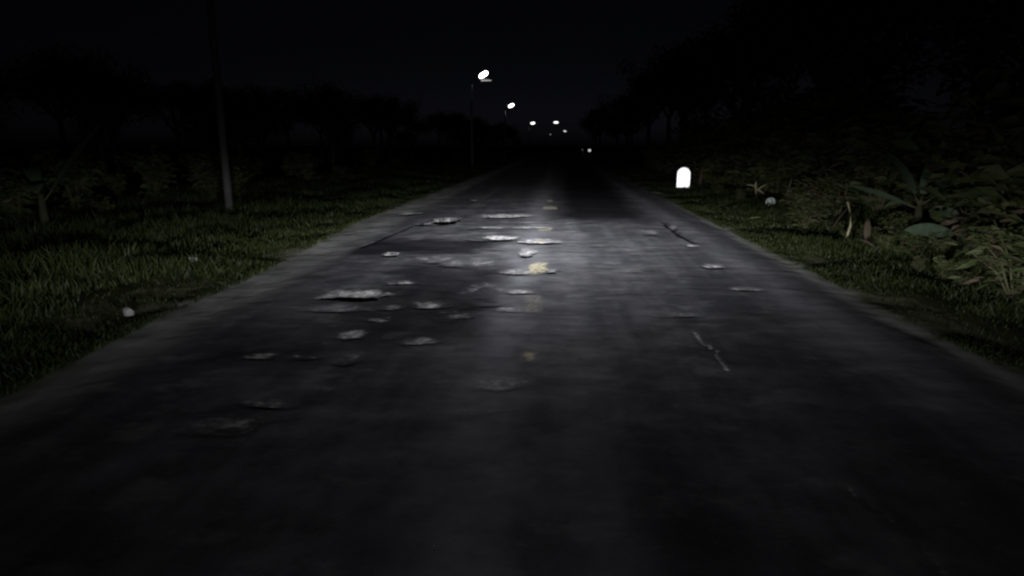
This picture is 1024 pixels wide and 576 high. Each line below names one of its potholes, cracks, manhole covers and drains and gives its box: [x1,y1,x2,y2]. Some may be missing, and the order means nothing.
pothole [411,301,452,310]
pothole [171,413,282,438]
pothole [334,329,370,341]
pothole [240,397,309,410]
pothole [397,337,440,346]
pothole [500,268,536,276]
pothole [464,376,532,395]
pothole [318,290,390,302]
pothole [241,352,280,360]
crack [691,331,736,372]
crack [661,221,700,244]
